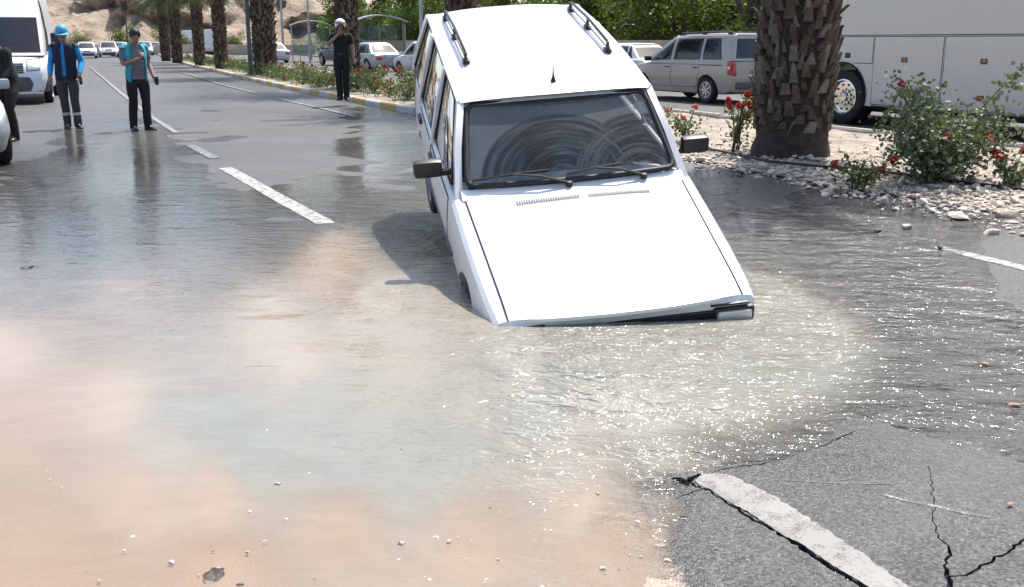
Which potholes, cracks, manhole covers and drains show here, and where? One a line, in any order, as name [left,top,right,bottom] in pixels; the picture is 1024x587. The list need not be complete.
crack [623,431,867,587]
crack [928,466,1024,587]
